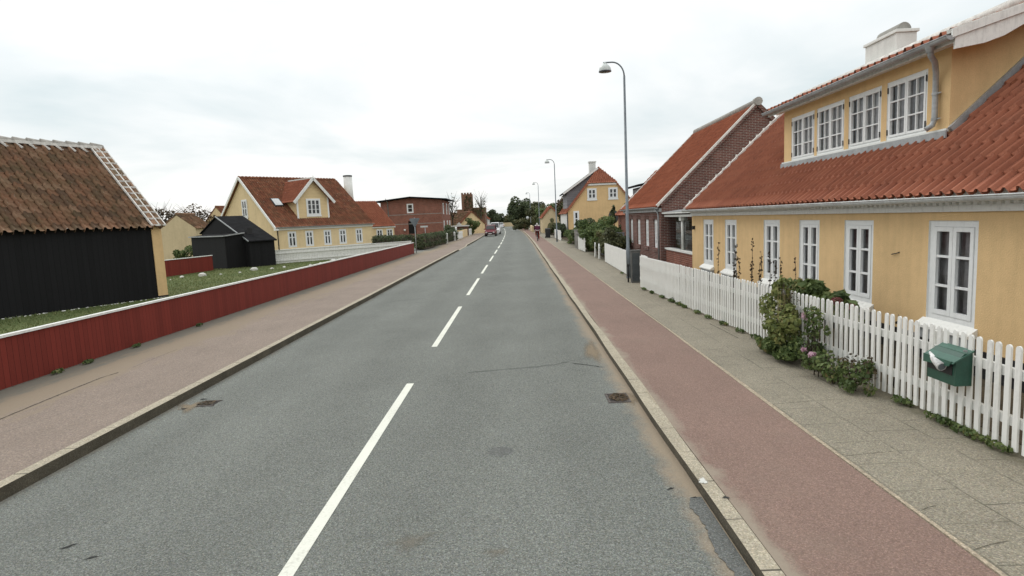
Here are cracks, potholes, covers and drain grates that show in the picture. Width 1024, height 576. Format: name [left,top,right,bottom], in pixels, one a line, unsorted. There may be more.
drain grate [605,393,631,403]
